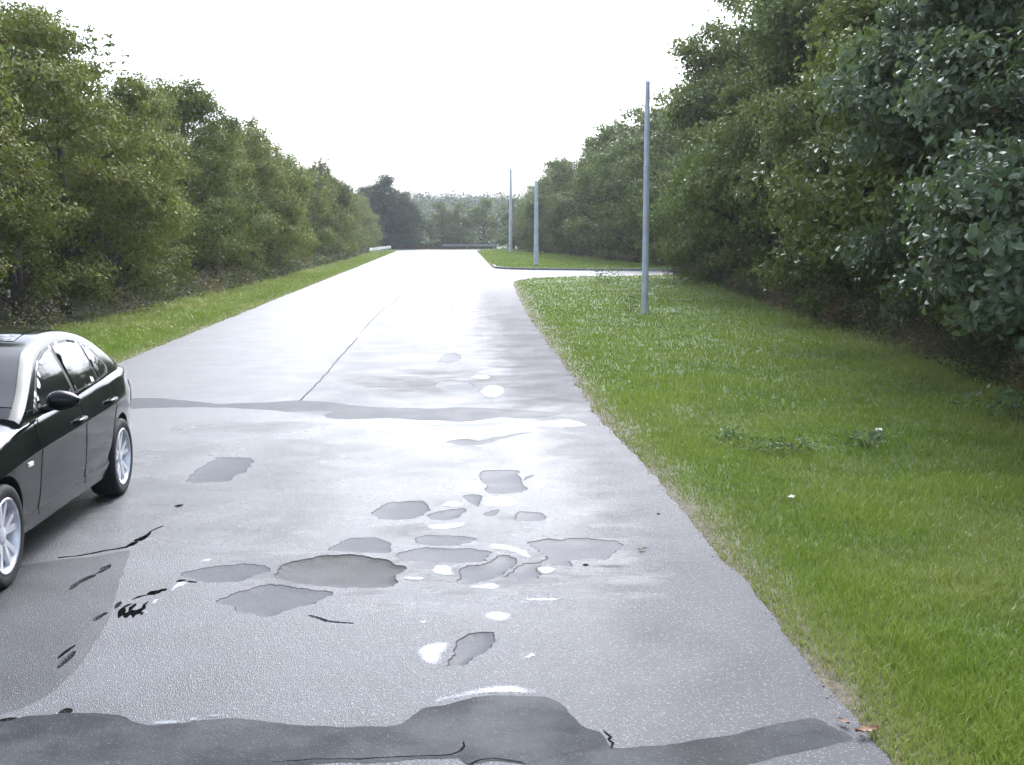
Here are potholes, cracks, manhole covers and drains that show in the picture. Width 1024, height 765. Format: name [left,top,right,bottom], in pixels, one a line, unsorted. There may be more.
pothole [274,554,407,588]
pothole [327,537,392,553]
pothole [181,563,271,583]
crack [56,646,76,669]
pothole [396,547,492,563]
pothole [446,632,495,666]
pothole [456,555,517,584]
pothole [215,583,334,617]
pothole [186,457,254,483]
pothole [502,538,623,579]
crack [58,526,197,621]
pothole [479,470,528,494]
